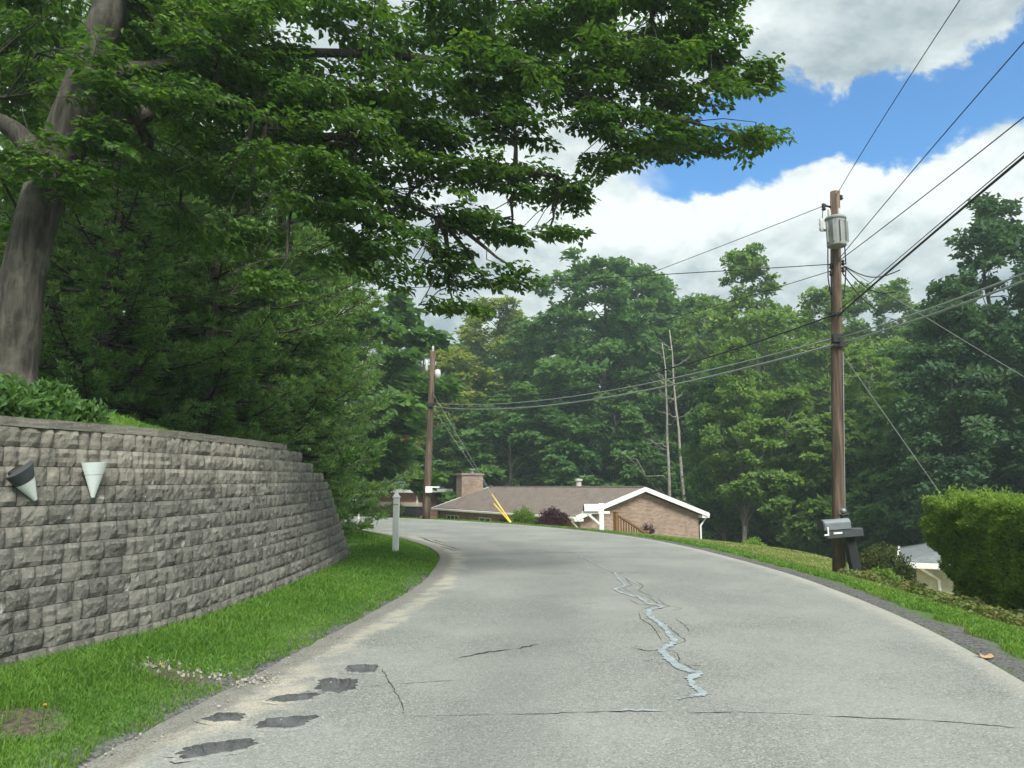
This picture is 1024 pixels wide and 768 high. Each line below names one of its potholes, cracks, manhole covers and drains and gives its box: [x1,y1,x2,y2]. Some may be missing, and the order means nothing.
crack [362,669,452,714]
crack [435,552,1020,728]
